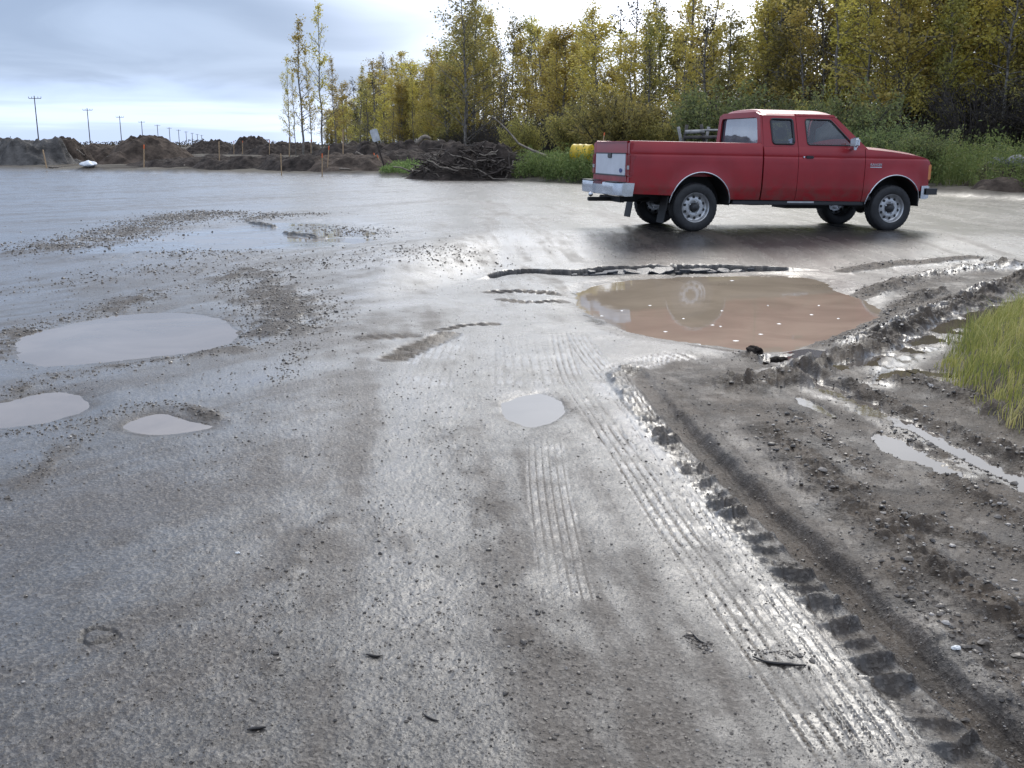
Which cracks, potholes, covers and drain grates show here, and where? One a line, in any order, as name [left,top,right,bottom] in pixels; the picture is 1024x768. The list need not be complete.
pothole [568,275,890,353]
crack [486,264,794,278]
pothole [1,310,251,368]
pothole [108,409,227,437]
pothole [0,387,104,430]
pothole [488,390,578,430]
